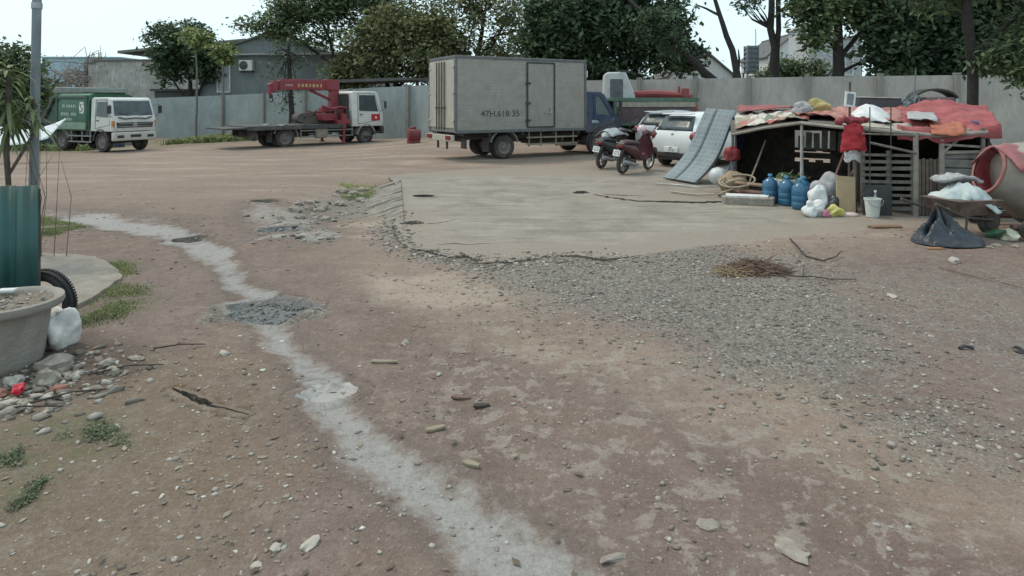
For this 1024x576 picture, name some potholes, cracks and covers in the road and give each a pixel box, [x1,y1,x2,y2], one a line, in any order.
crack [164,386,256,419]
crack [594,194,722,204]
pothole [162,233,217,245]
pothole [249,225,316,236]
